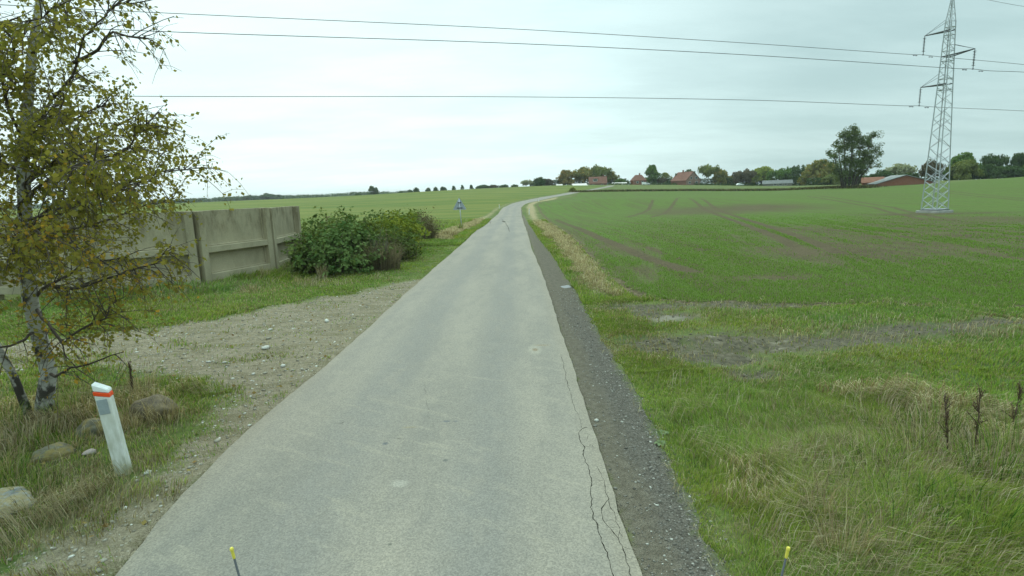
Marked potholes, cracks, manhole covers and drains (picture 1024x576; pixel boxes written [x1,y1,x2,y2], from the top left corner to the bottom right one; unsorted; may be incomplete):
crack [546,357,632,576]
